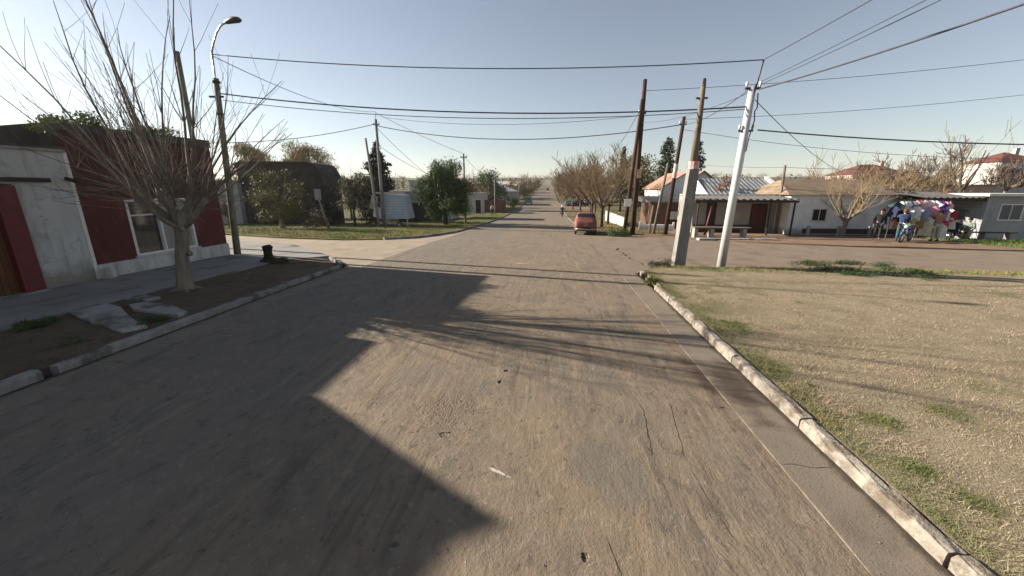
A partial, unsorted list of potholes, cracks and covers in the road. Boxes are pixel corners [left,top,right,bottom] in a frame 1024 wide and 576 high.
crack [671,406,732,537]
